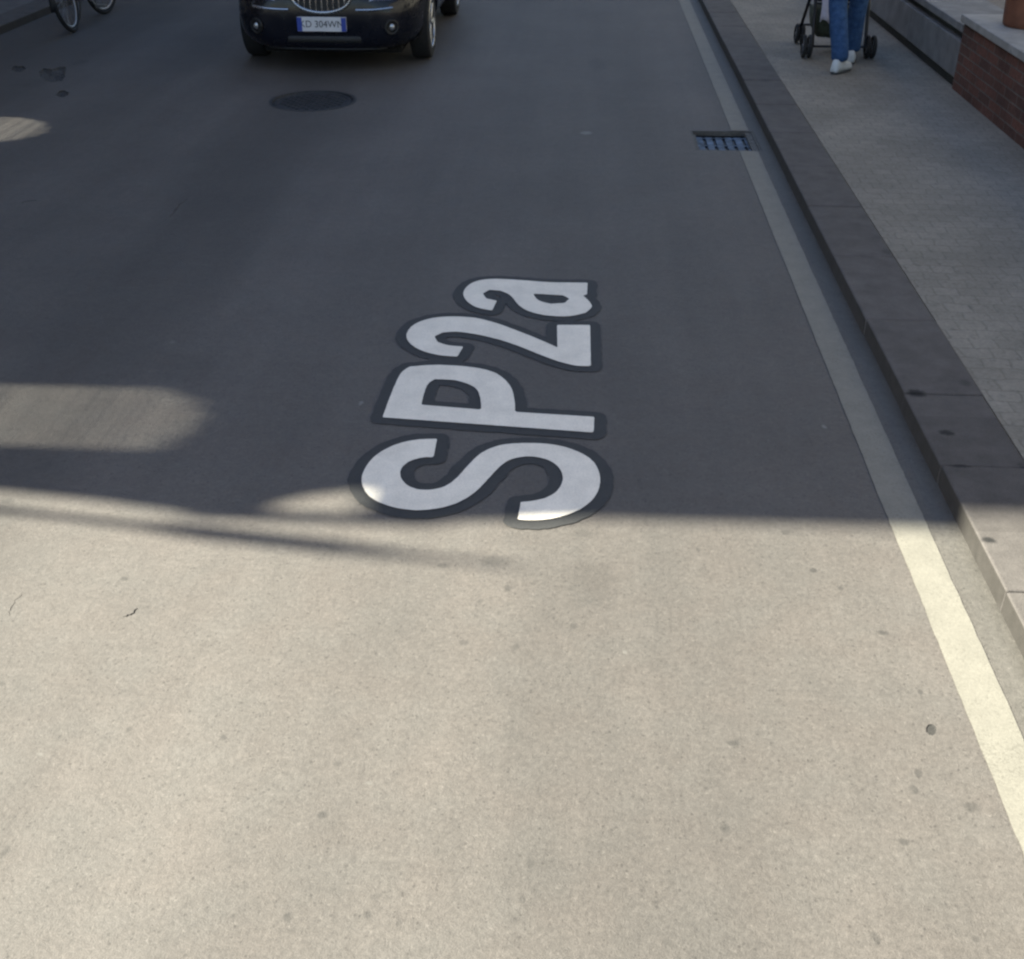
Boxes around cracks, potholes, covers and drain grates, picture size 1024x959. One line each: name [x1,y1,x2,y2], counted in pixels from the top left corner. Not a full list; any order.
manhole cover [269,90,357,111]
drain grate [690,131,762,151]
